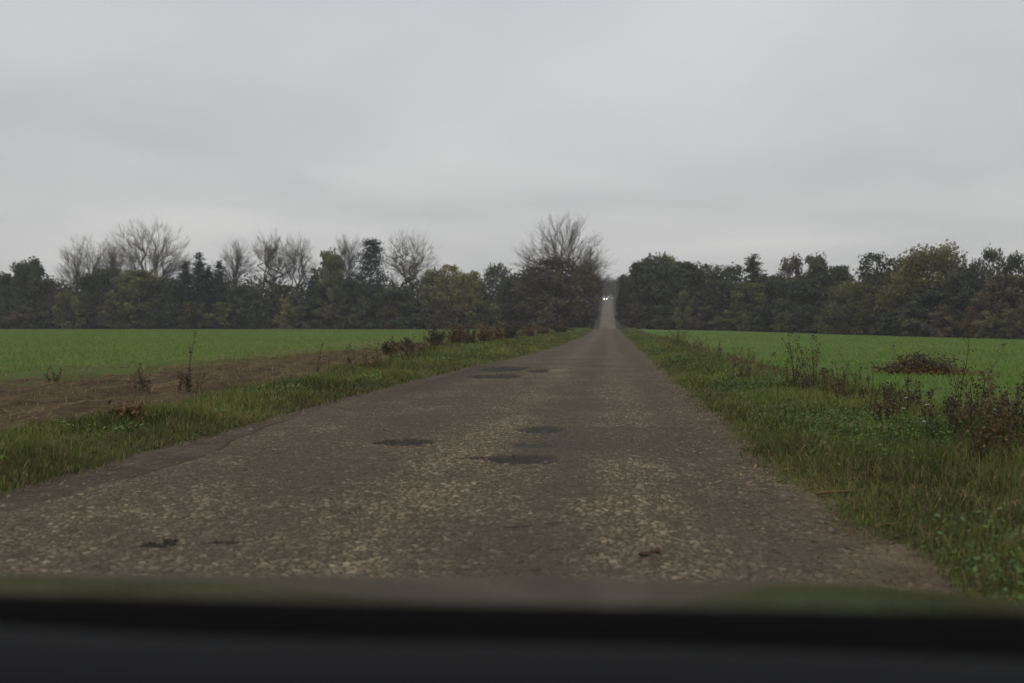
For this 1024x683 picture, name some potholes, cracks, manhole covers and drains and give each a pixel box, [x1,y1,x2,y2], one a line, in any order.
pothole [373,438,435,446]
pothole [138,539,179,548]
pothole [453,454,560,465]
pothole [516,425,569,434]
